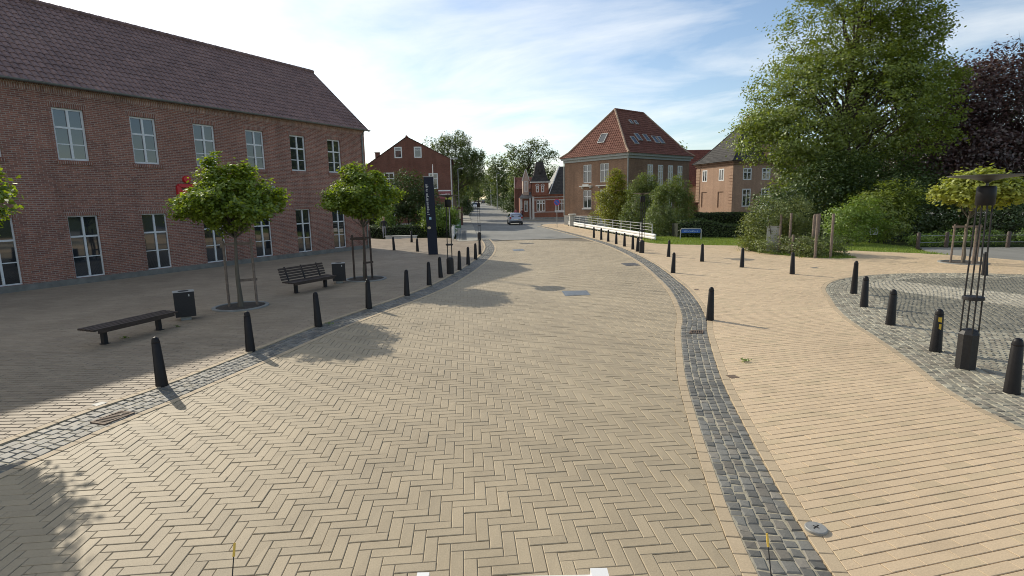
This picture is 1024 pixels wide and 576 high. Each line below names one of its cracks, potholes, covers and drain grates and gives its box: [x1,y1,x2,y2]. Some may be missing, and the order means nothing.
drain grate [90,410,135,425]
manhole cover [804,521,828,537]
